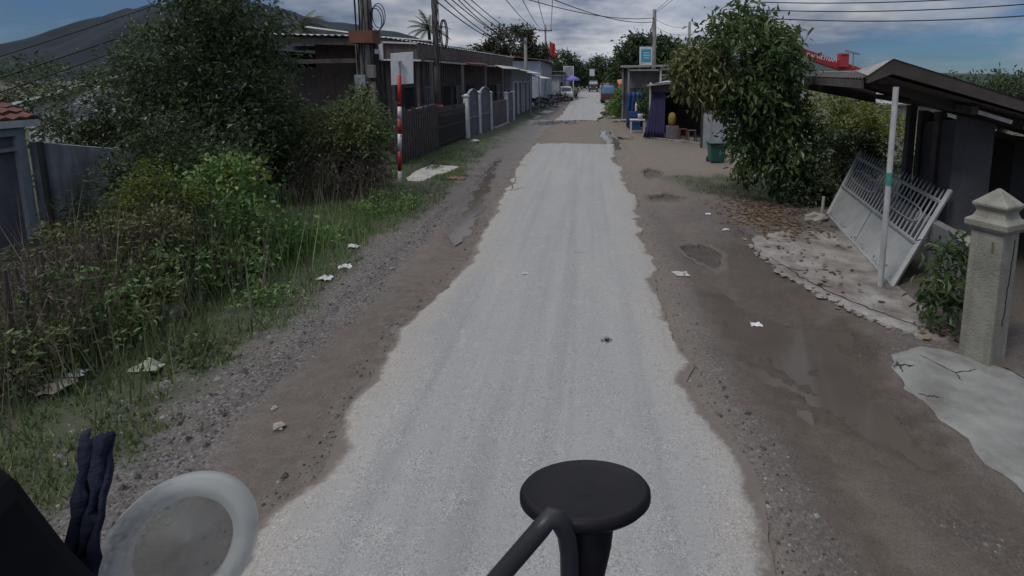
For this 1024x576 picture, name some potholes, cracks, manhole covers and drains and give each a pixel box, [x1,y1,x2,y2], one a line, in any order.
pothole [640,167,664,179]
pothole [672,240,730,275]
crack [771,257,922,327]
pothole [643,192,687,202]
crack [893,356,970,379]
